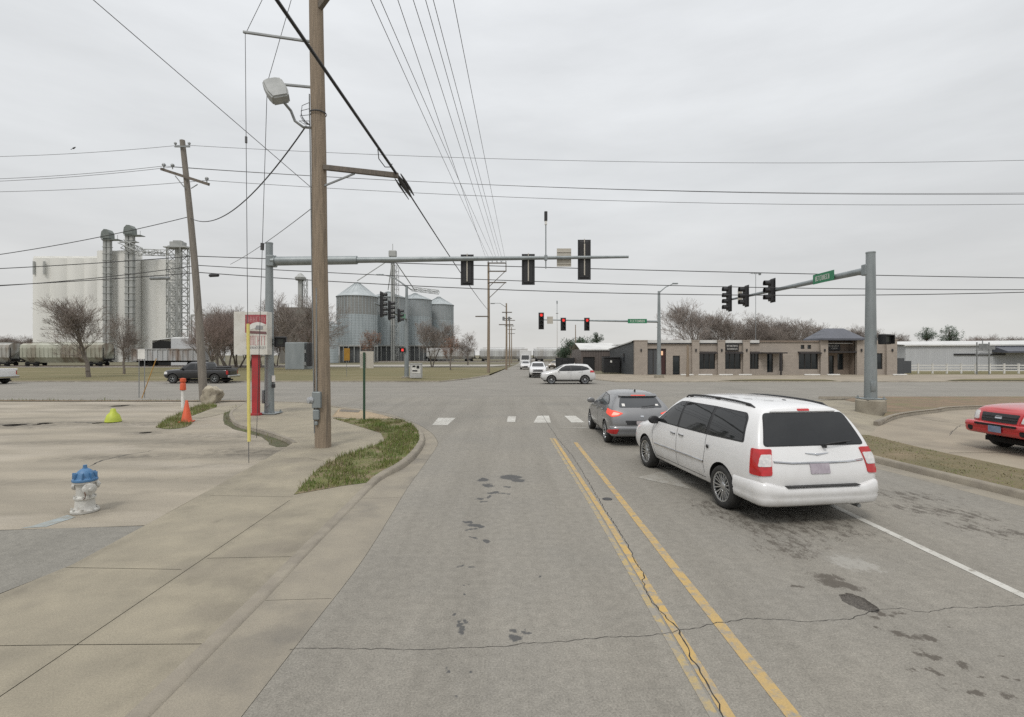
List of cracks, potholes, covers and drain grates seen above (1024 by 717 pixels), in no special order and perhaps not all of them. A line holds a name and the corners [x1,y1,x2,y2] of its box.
crack [290,415,1024,717]
